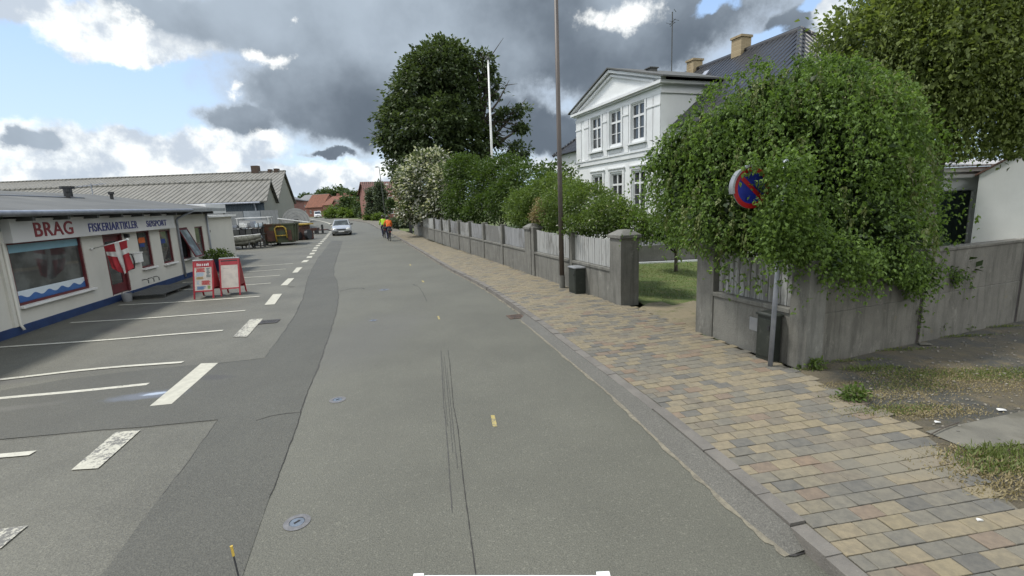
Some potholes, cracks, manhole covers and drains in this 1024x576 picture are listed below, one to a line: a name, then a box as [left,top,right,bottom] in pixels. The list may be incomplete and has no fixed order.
manhole cover [283,514,311,531]
